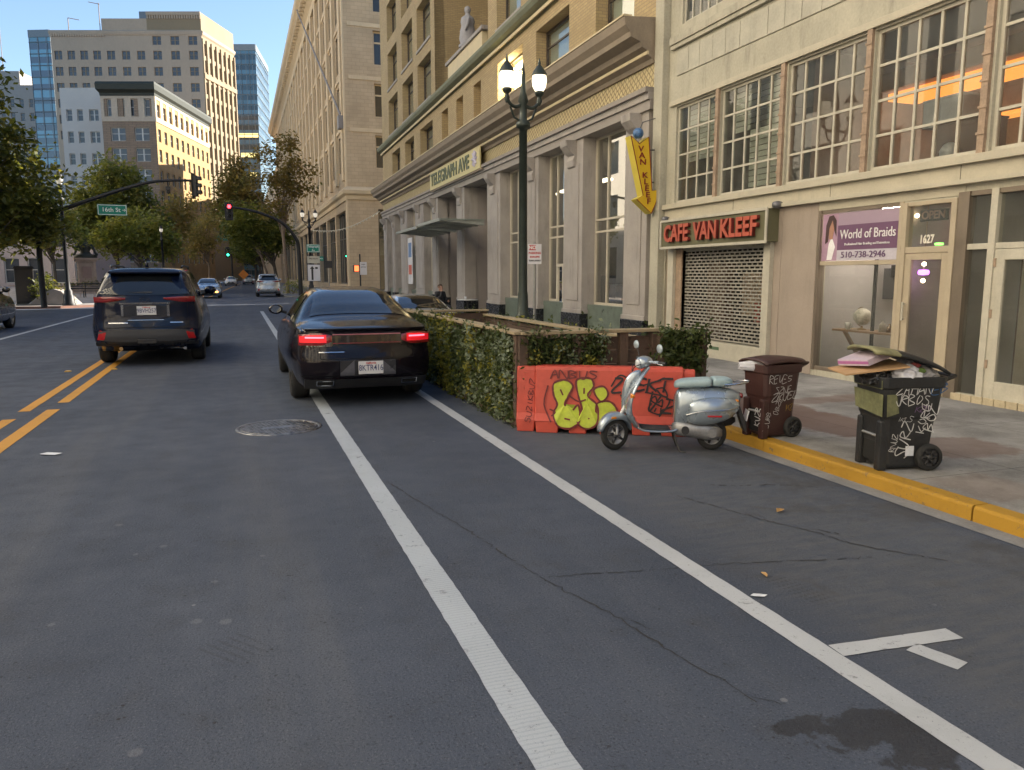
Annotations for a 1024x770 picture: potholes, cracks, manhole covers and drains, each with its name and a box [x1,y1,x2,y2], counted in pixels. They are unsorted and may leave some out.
manhole cover [235,419,322,436]
crack [389,483,959,714]
